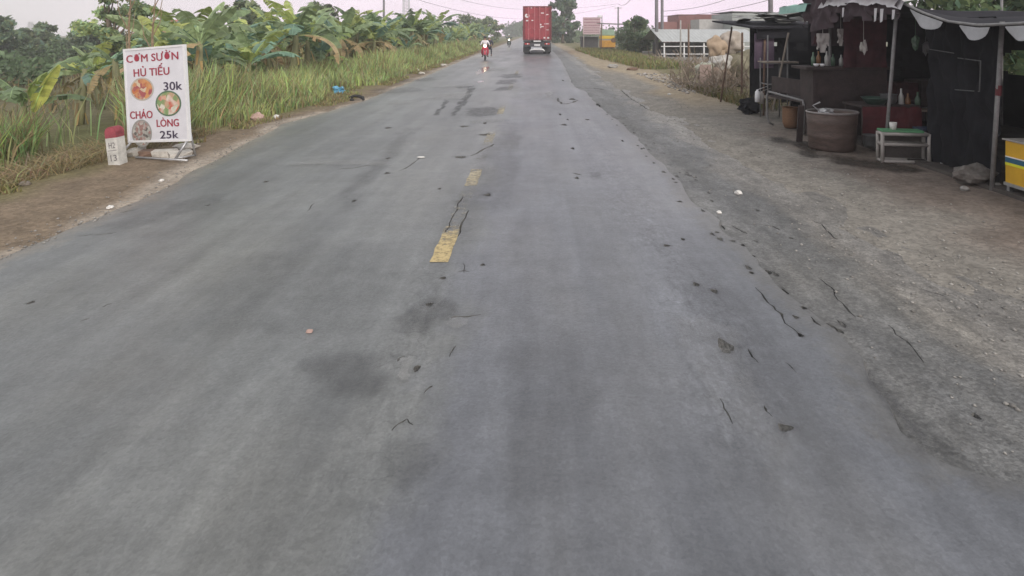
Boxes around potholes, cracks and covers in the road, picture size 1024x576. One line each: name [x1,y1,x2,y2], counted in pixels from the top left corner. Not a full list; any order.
crack [445,197,469,236]
pothole [718,338,734,353]
crack [748,278,854,362]
crack [890,326,924,363]
